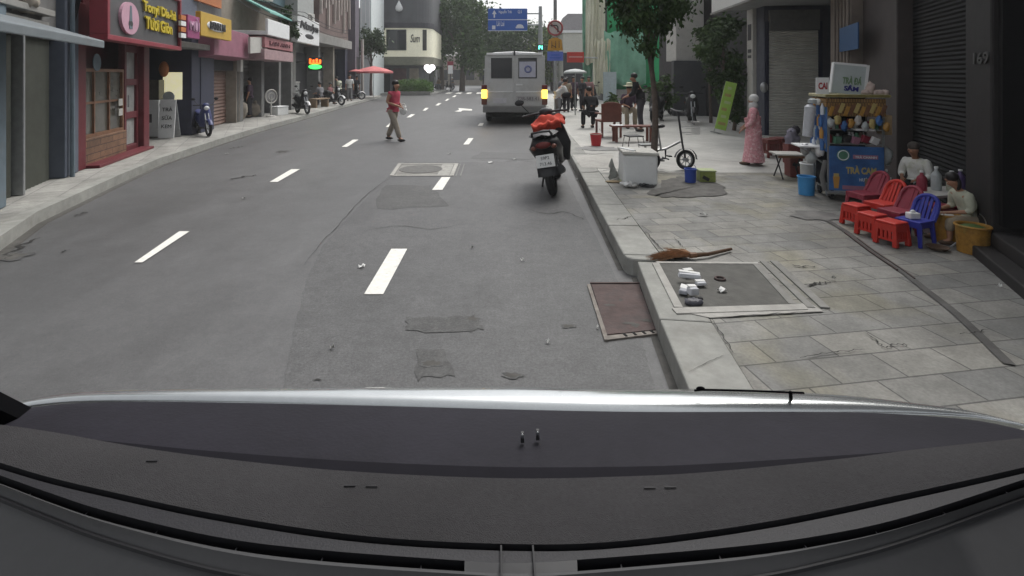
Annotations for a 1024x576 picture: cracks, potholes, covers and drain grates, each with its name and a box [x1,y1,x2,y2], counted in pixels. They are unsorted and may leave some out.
crack [2,238,37,259]
manhole cover [390,163,465,176]
crack [800,333,911,358]
drain grate [587,282,658,342]
